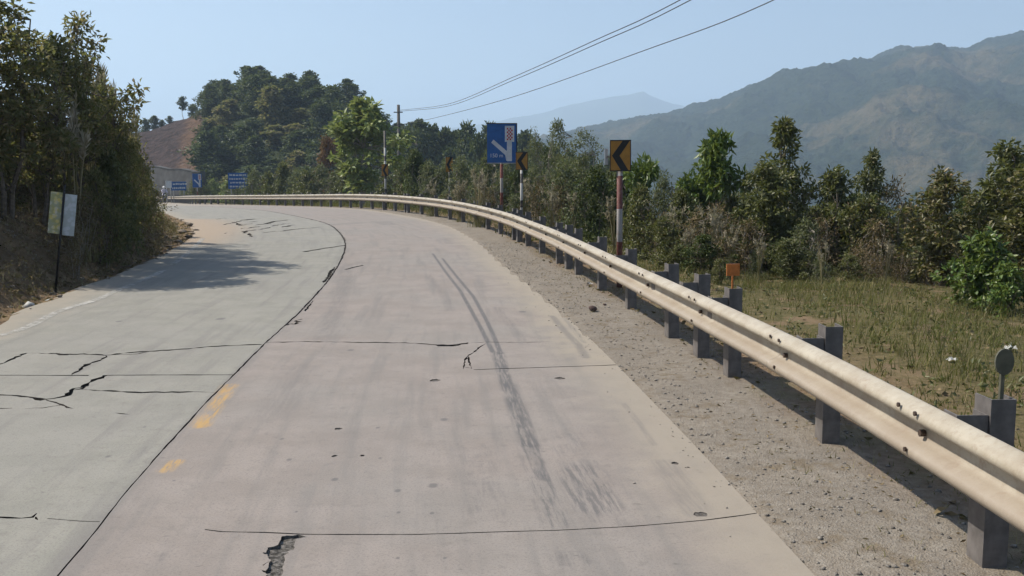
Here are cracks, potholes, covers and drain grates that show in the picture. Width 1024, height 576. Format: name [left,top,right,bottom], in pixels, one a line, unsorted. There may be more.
crack [0,301,483,414]
pothole [262,535,305,576]
